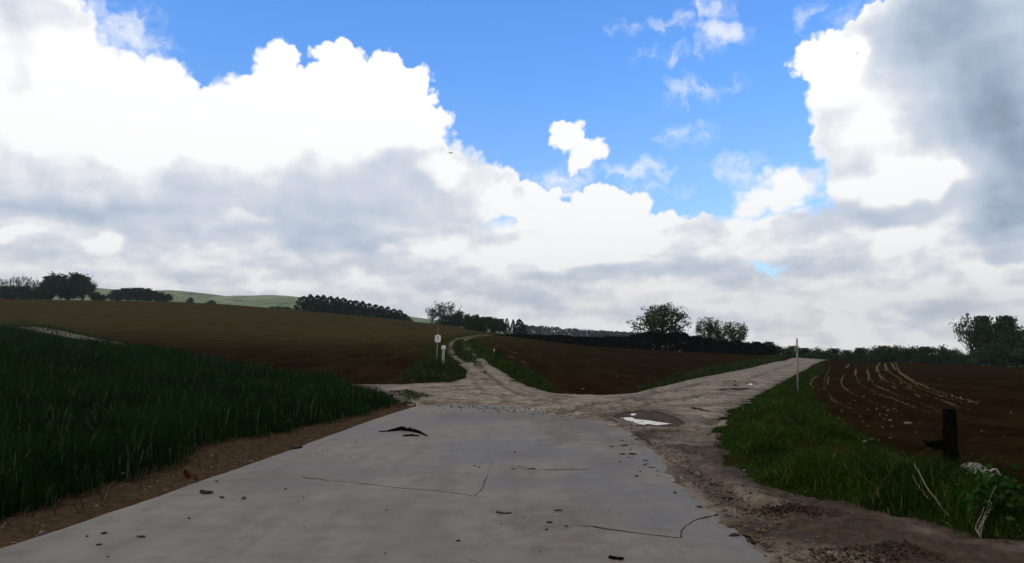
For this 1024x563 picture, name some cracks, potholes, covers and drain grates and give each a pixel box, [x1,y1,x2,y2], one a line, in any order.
crack [303,464,492,496]
pothole [609,409,689,427]
crack [585,516,712,538]
